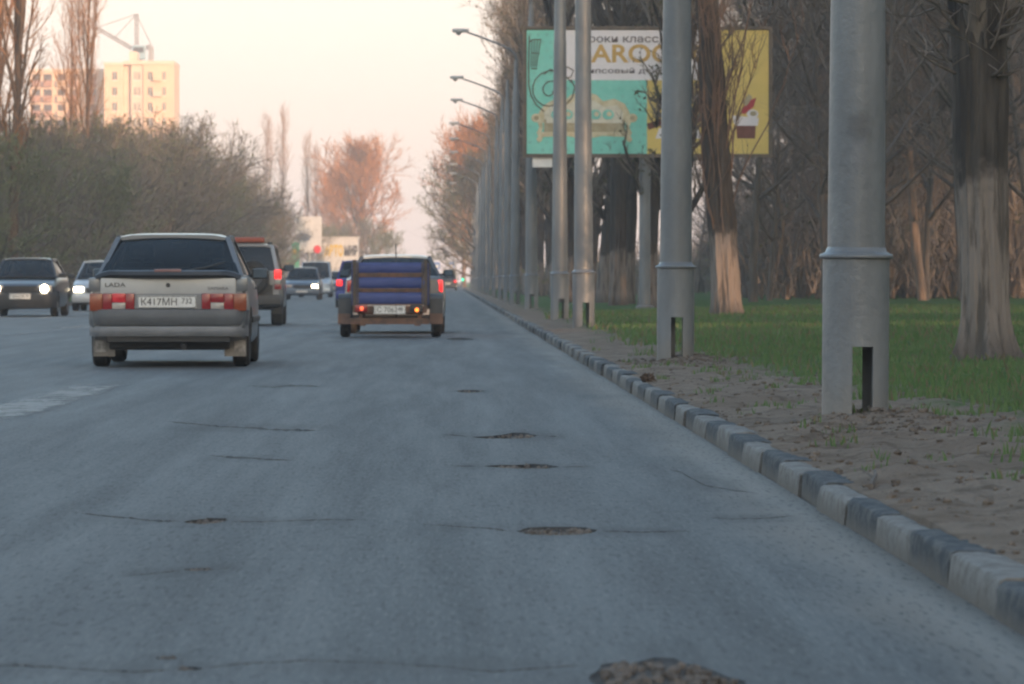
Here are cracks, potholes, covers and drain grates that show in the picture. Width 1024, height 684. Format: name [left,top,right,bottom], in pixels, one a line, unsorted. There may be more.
crack [665,468,753,493]
pothole [589,657,746,684]
crack [168,421,320,431]
crack [82,513,172,522]
pothole [518,527,596,535]
crack [0,660,567,673]
